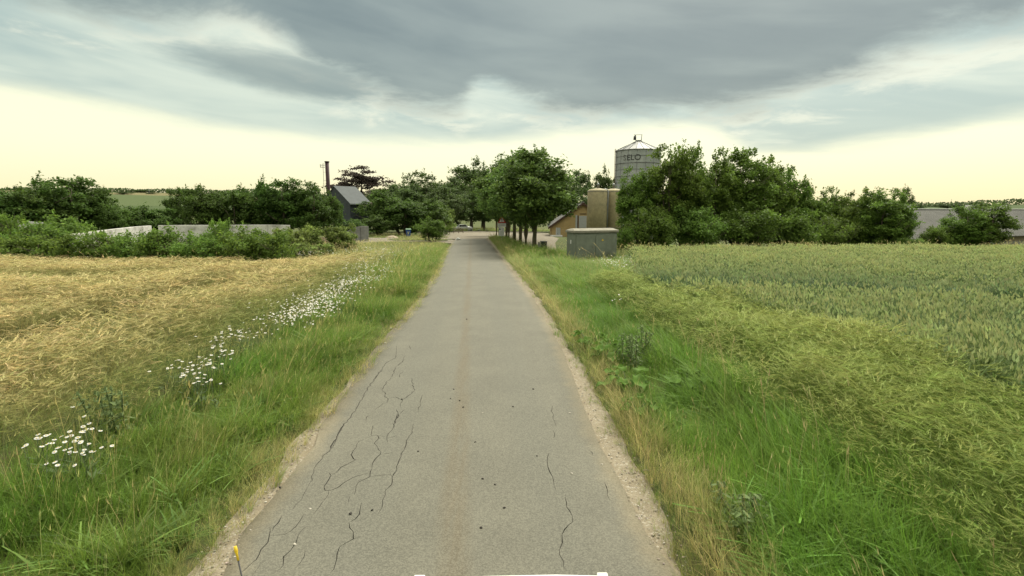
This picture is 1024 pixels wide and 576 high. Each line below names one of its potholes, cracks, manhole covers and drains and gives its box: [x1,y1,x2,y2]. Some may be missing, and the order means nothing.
crack [293,346,422,571]
crack [547,454,573,566]
